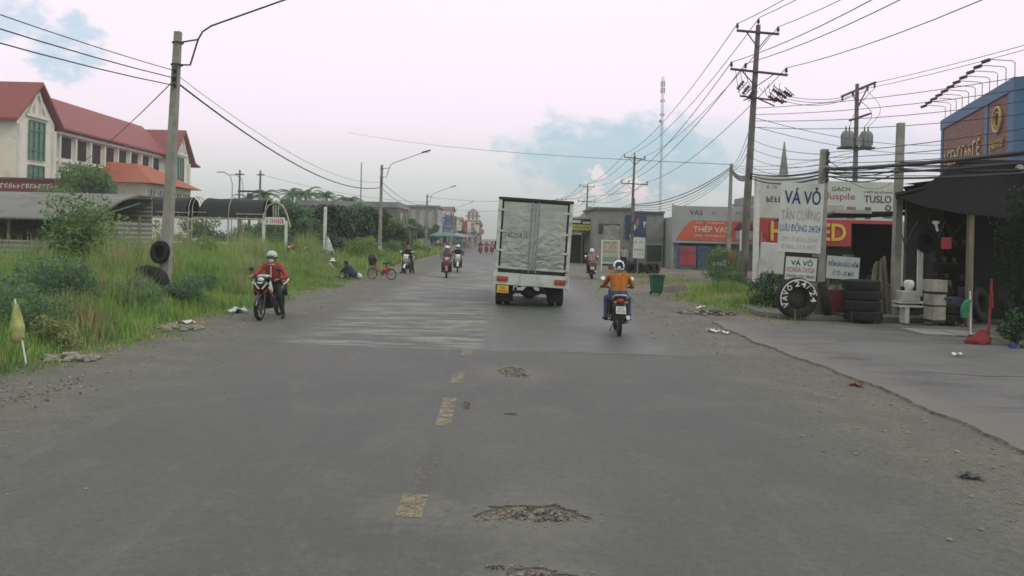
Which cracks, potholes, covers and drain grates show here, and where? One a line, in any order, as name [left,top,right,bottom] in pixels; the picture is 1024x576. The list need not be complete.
pothole [495,558,593,576]
pothole [447,499,608,533]
pothole [493,366,531,380]
